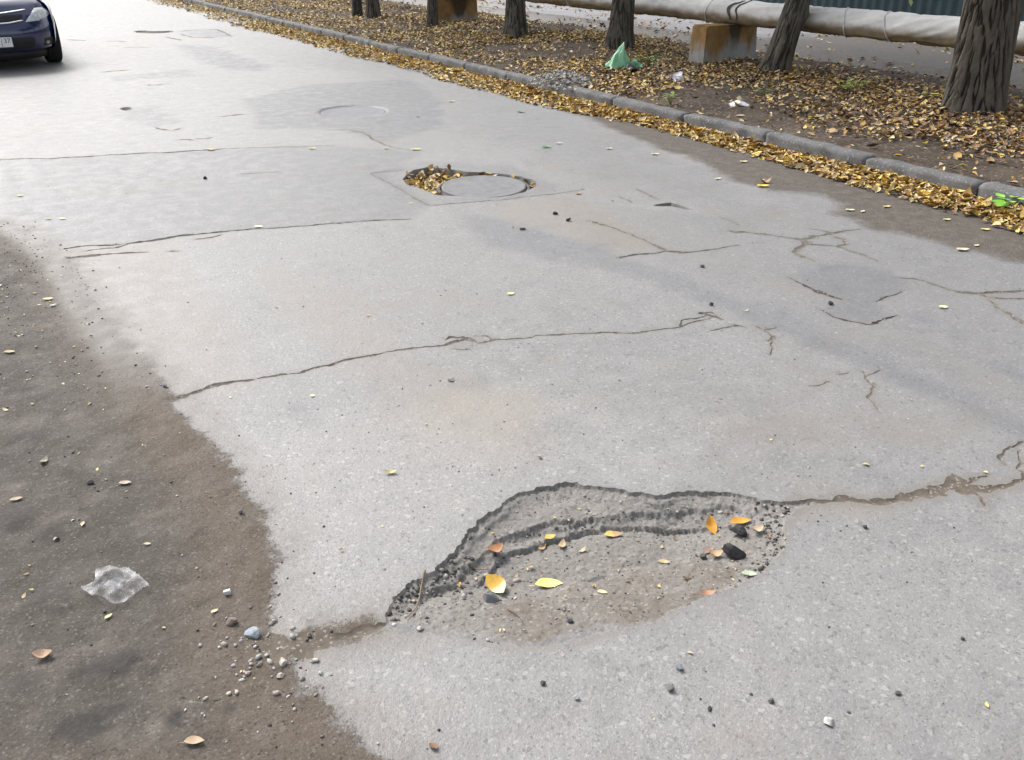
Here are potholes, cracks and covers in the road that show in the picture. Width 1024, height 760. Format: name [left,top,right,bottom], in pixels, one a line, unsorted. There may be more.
crack [815,370,880,409]
manhole cover [437,175,531,197]
crack [162,312,777,404]
crack [590,217,877,262]
pothole [384,481,815,649]
crack [790,278,1024,325]
manhole cover [321,107,386,117]
crack [351,130,407,150]
crack [64,171,584,259]
crack [799,441,1024,506]
